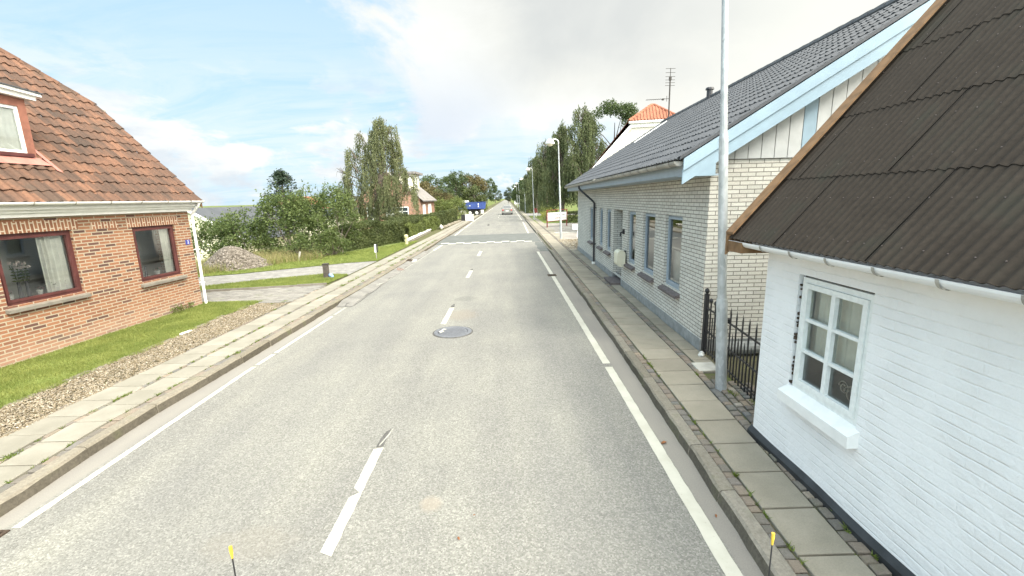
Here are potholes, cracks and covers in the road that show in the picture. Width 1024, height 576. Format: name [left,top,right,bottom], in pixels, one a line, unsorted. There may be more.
manhole cover [432,326,473,338]
